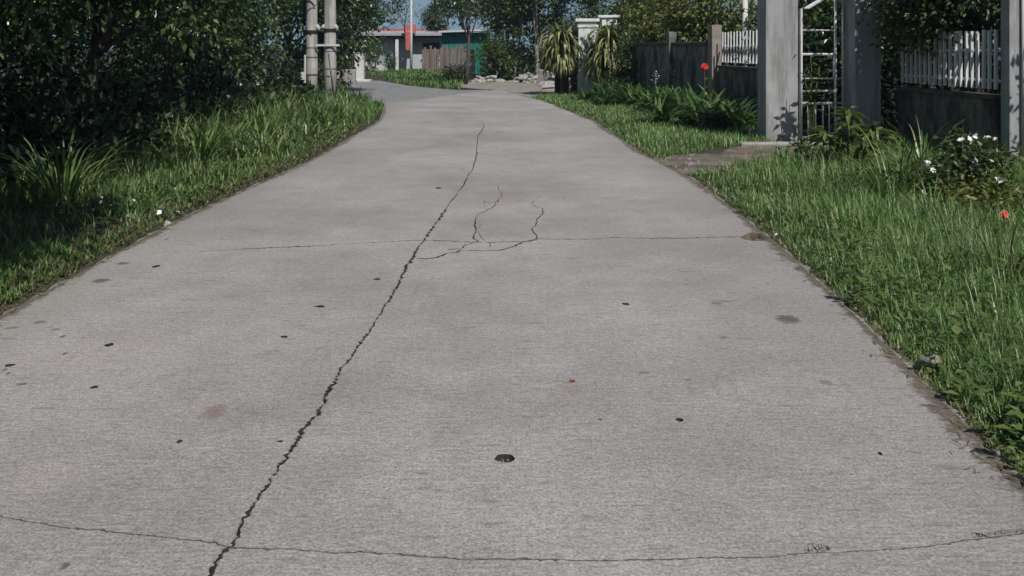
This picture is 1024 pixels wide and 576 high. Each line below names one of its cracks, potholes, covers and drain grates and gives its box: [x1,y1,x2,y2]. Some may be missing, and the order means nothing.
pothole [495,454,515,463]
crack [197,120,739,576]
